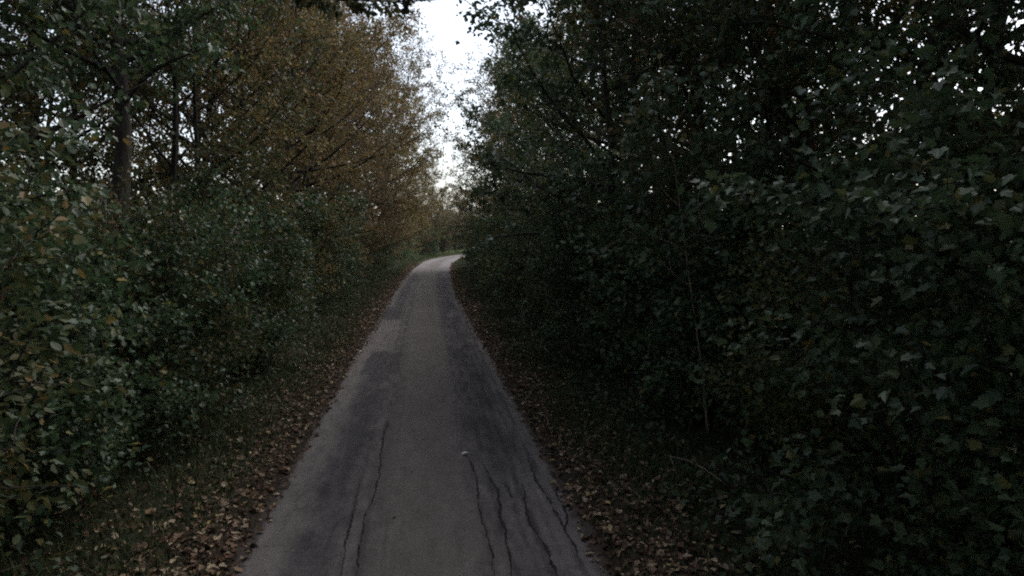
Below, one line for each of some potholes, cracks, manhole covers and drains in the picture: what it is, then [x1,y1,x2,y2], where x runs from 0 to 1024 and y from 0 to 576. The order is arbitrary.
crack [341,409,390,576]
crack [459,446,582,576]
